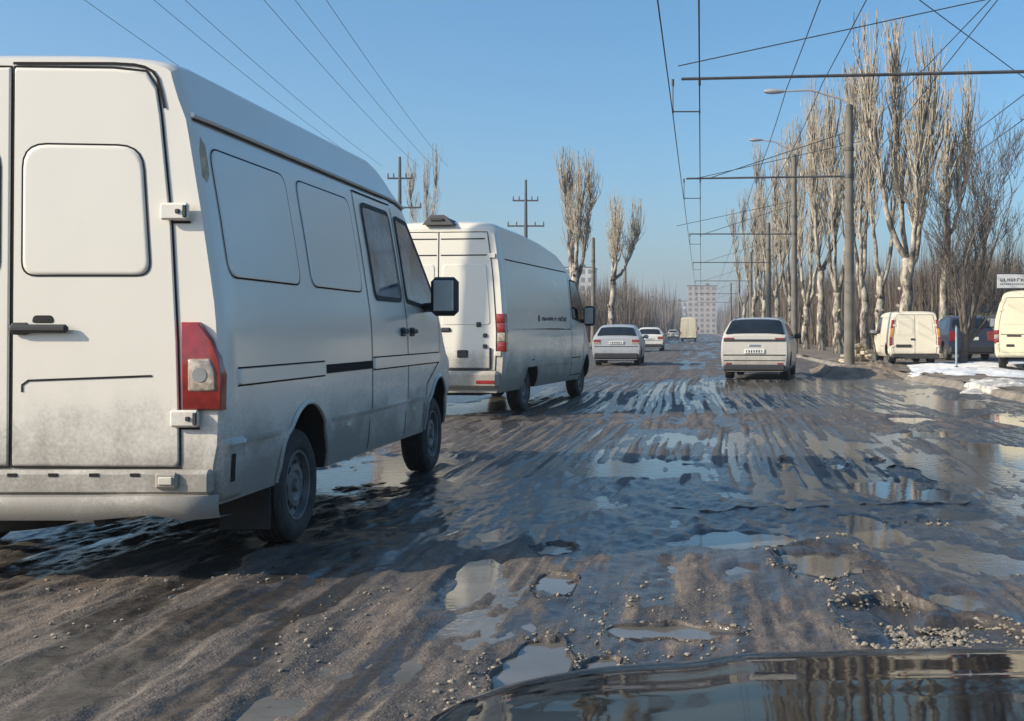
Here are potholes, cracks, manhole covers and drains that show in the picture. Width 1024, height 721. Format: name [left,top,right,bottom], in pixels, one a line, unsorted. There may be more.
pothole [598,619,753,642]
pothole [753,539,895,580]
pothole [864,456,886,465]
pothole [529,541,579,555]
pothole [882,462,938,491]
pothole [826,585,1024,649]
pothole [531,570,581,600]
